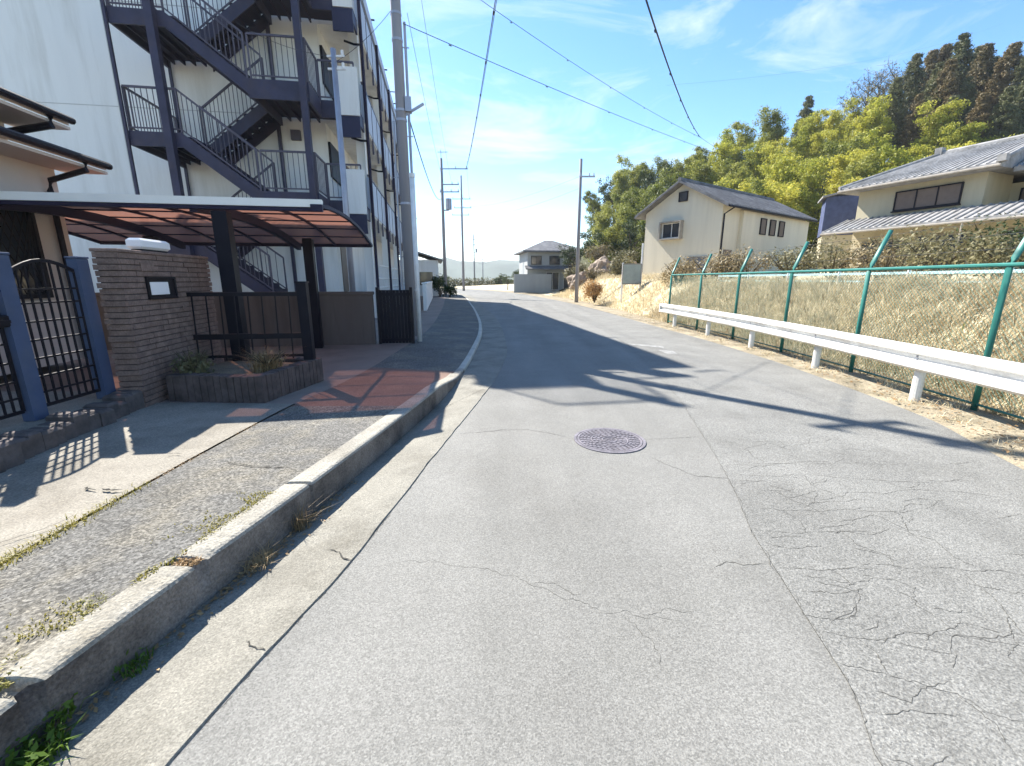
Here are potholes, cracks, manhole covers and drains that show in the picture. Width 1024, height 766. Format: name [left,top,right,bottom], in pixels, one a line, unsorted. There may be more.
crack [730,439,1023,766]
manhole cover [574,428,646,454]
crack [368,560,693,667]
